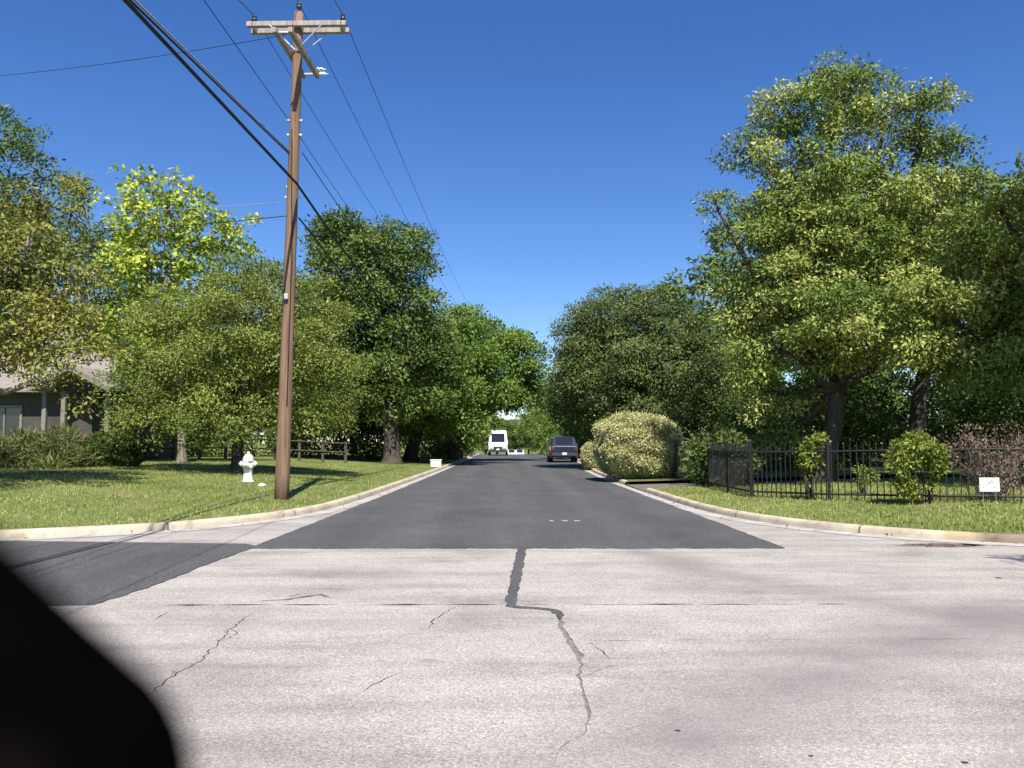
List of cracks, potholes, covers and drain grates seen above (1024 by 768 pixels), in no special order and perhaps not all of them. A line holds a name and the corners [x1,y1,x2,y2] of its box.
crack [548,616,610,766]
crack [161,593,331,686]
